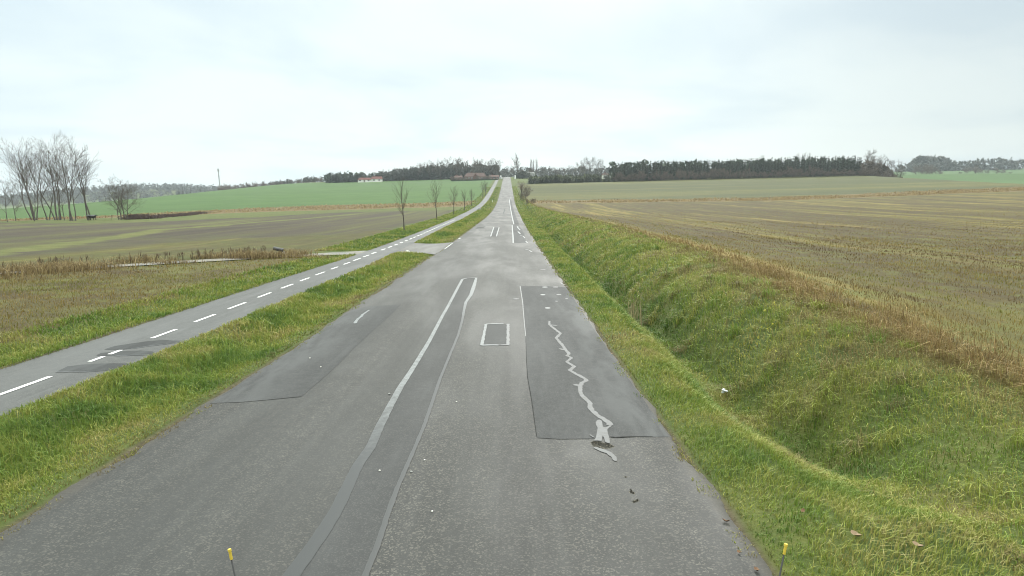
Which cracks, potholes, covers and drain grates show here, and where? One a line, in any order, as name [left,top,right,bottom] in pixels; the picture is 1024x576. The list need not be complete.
crack [541,294,646,461]
